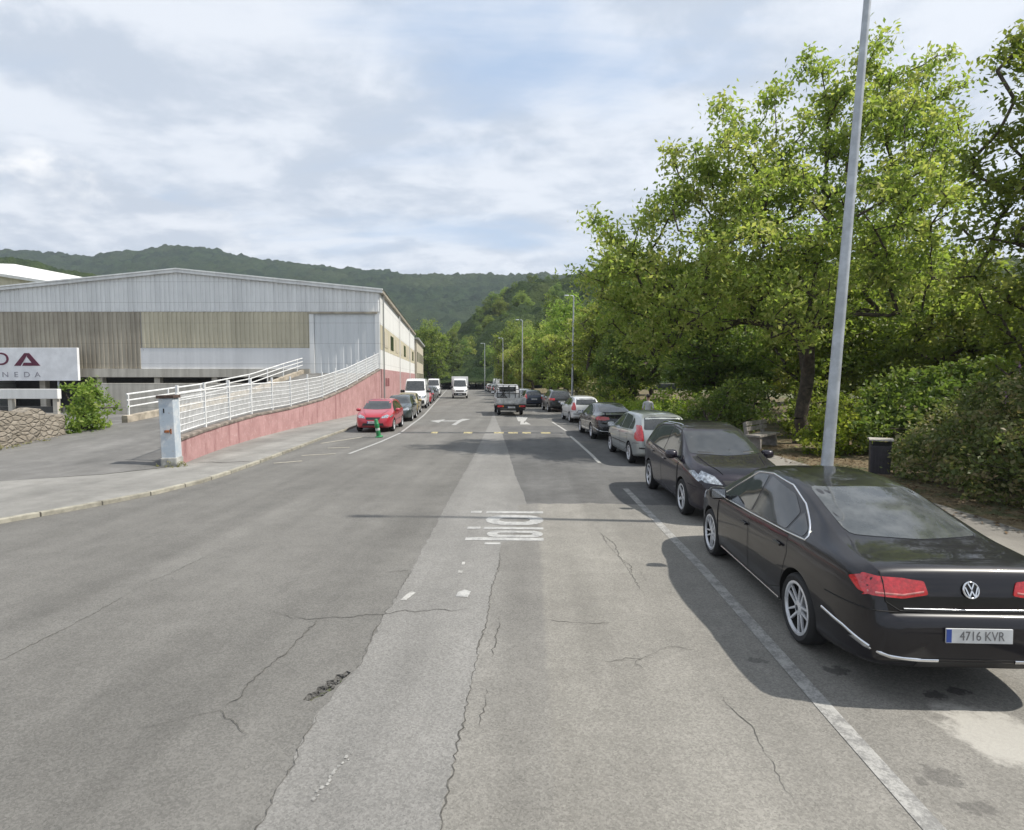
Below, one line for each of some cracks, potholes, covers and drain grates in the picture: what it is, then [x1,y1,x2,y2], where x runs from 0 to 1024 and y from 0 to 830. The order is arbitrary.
pothole [303,671,351,701]
crack [142,552,501,830]
crack [721,695,794,800]
crack [1,552,213,660]
crack [603,536,648,596]
